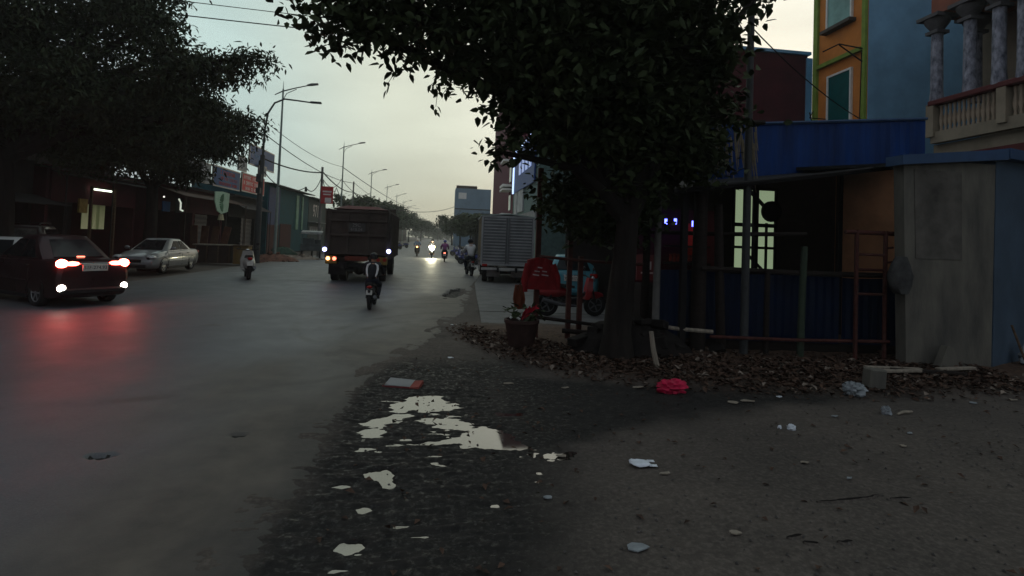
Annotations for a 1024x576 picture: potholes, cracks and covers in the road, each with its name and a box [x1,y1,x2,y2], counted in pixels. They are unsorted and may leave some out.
pothole [442,288,461,299]
pothole [376,393,479,416]
pothole [444,426,535,453]
